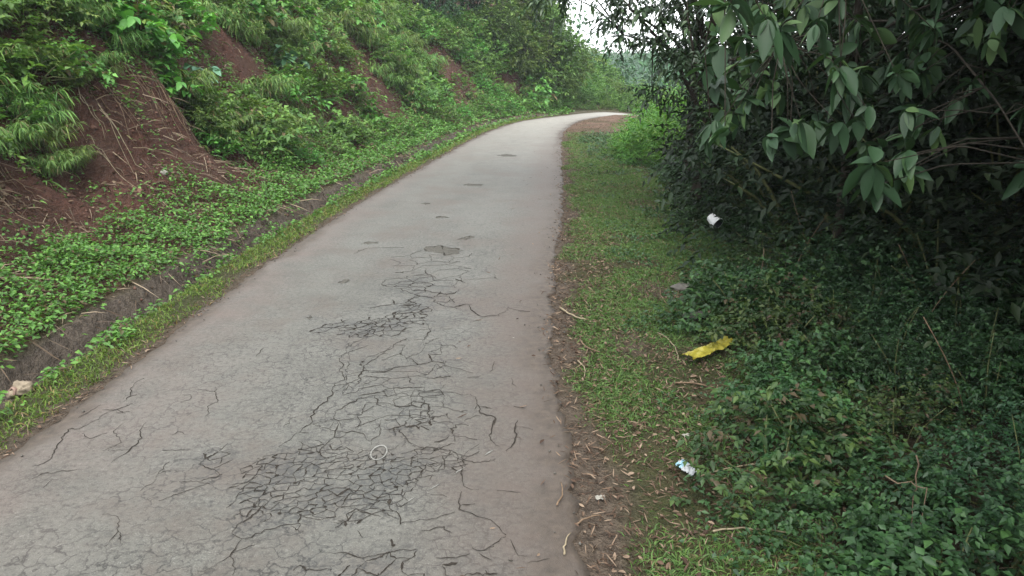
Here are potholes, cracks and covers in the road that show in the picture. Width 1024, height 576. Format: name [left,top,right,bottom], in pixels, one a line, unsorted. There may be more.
crack [141,247,549,576]
crack [32,379,142,487]
pothole [421,245,464,256]
